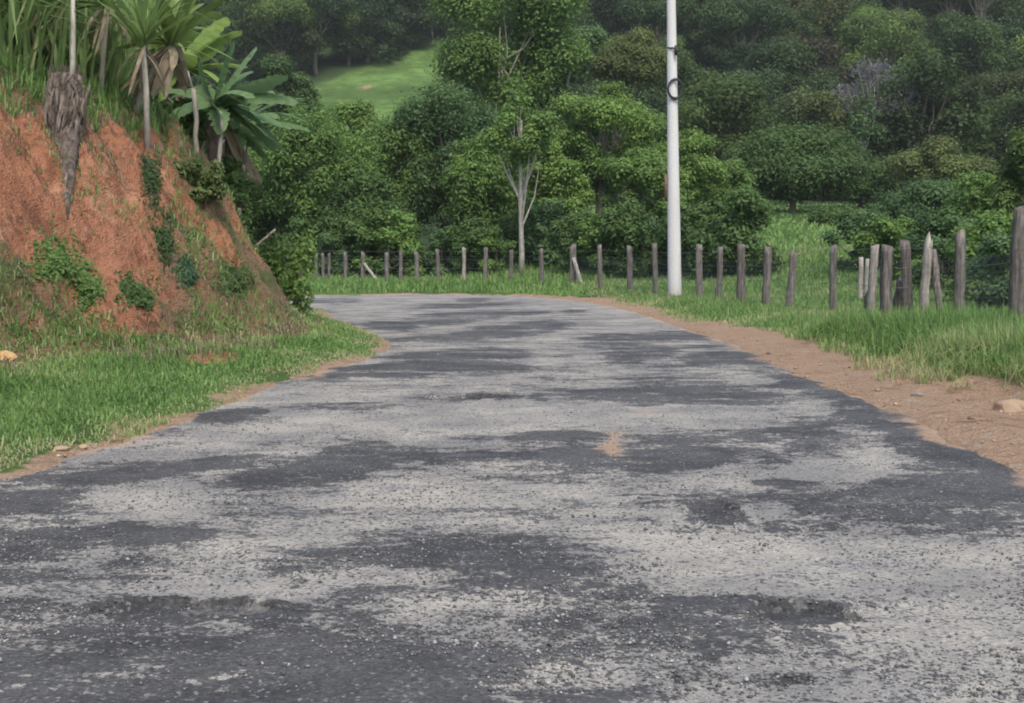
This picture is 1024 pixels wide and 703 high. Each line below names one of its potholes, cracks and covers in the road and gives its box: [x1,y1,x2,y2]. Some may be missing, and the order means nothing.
pothole [746,600,865,625]
pothole [89,595,278,616]
pothole [684,498,749,525]
